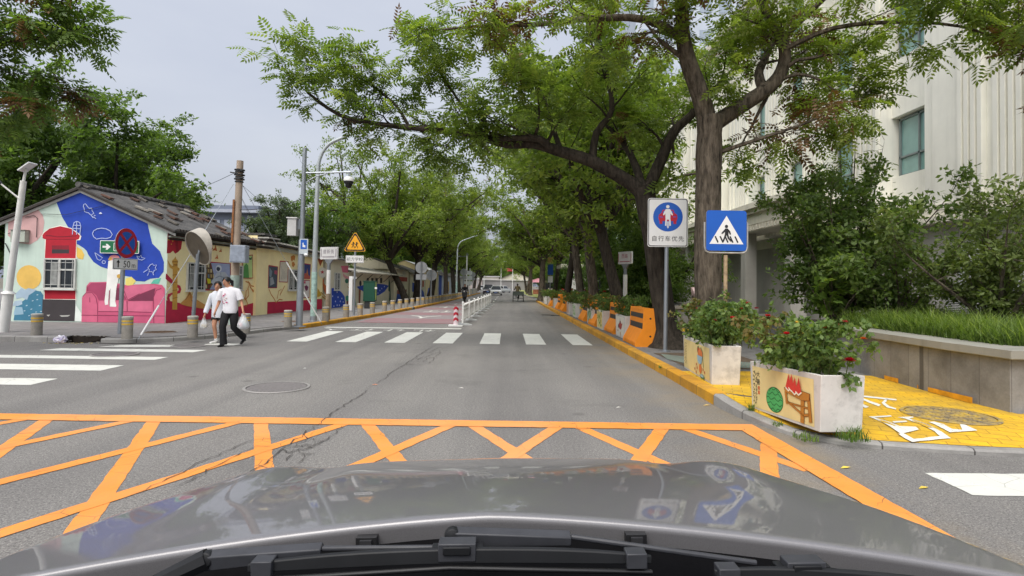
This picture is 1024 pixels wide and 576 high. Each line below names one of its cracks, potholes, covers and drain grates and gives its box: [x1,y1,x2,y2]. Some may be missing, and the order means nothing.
manhole cover [899,406,1004,425]
crack [378,347,478,382]
manhole cover [242,381,311,393]
